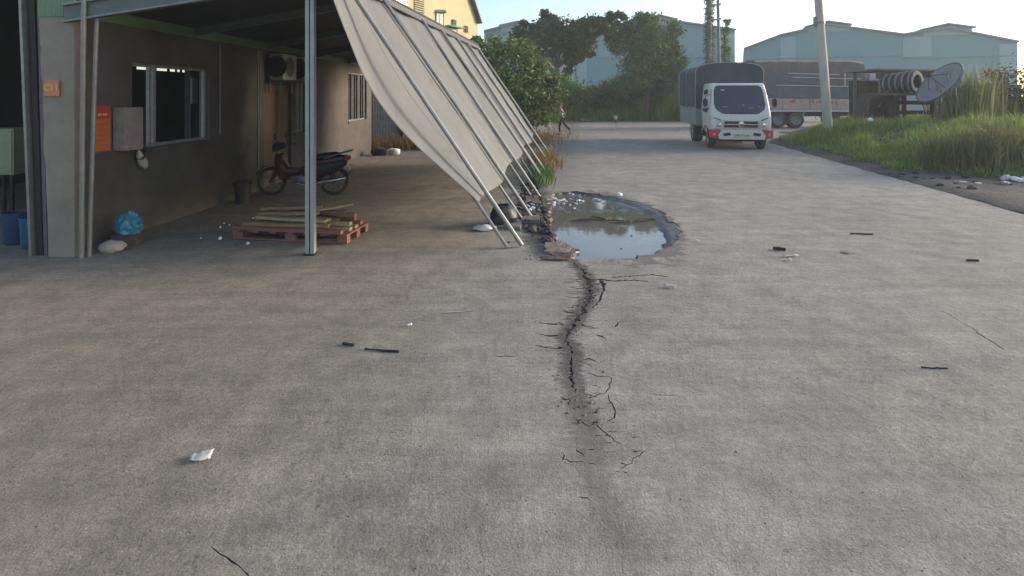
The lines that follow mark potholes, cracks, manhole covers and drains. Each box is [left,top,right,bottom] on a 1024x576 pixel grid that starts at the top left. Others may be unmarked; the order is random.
pothole [546,191,682,260]
crack [213,548,249,576]
